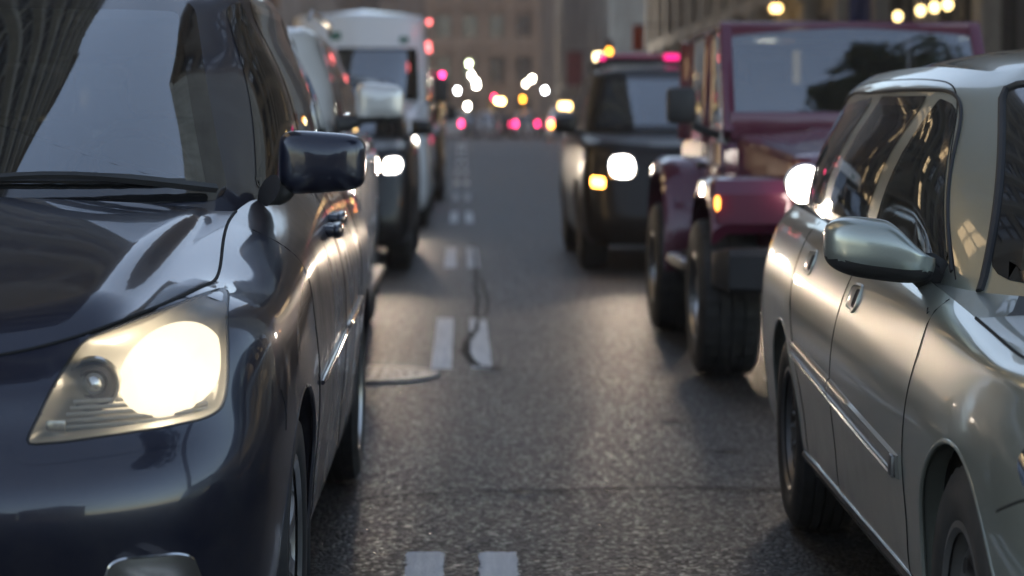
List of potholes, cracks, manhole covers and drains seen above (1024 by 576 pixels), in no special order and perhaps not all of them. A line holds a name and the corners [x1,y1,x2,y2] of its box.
manhole cover [365,366,440,383]
